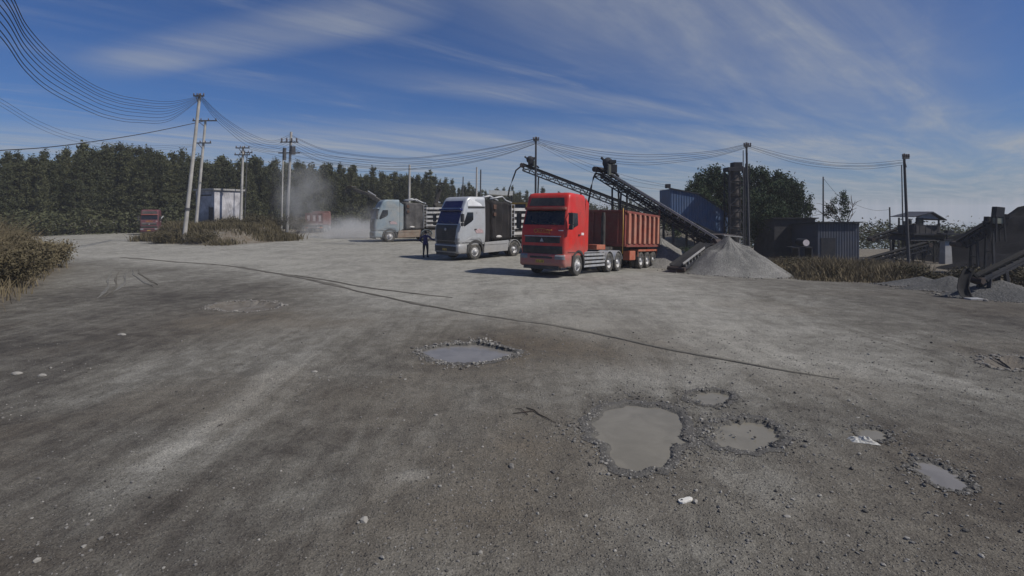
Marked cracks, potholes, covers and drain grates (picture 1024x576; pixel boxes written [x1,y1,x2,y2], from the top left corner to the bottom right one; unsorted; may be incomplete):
pothole [520,382,756,483]
pothole [408,334,530,374]
pothole [829,421,907,449]
pothole [958,353,1024,372]
pothole [886,450,993,501]
